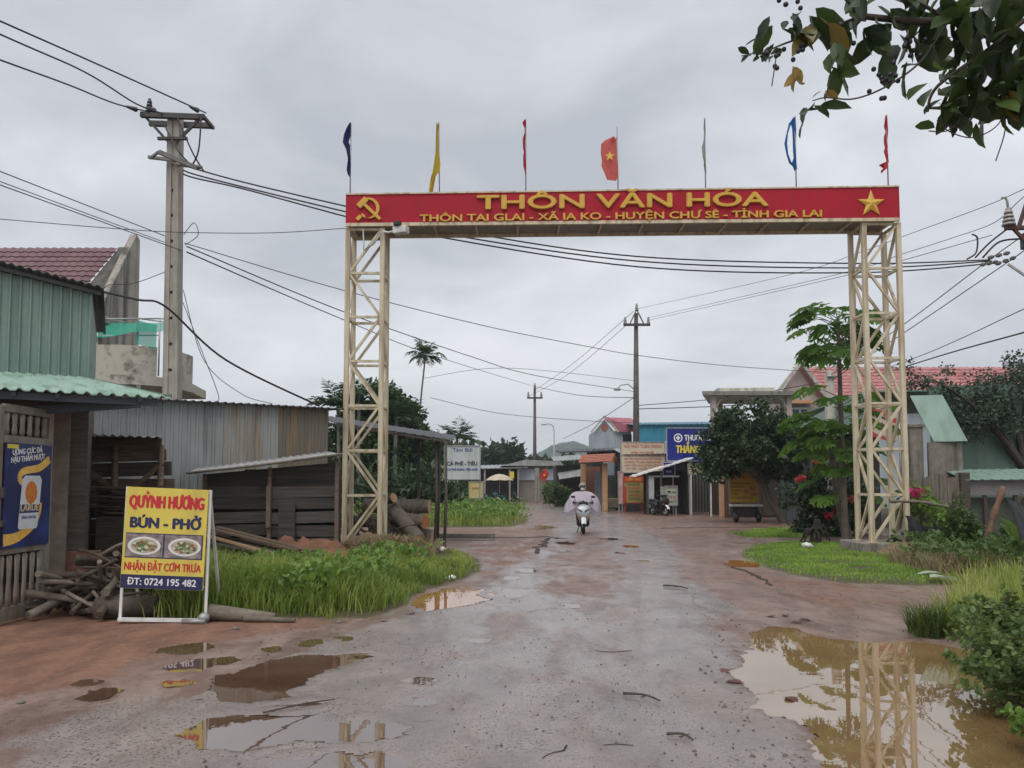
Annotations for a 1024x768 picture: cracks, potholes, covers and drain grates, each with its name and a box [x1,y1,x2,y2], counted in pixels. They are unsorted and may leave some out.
pothole [143,639,230,656]
pothole [398,586,508,614]
pothole [715,559,770,569]
pothole [47,683,147,707]
pothole [186,648,391,717]
pothole [386,672,453,689]
pothole [139,696,440,758]
pothole [279,636,343,650]
pothole [144,653,266,681]
pothole [710,624,1024,768]
pothole [49,675,126,691]
crack [731,567,772,586]
